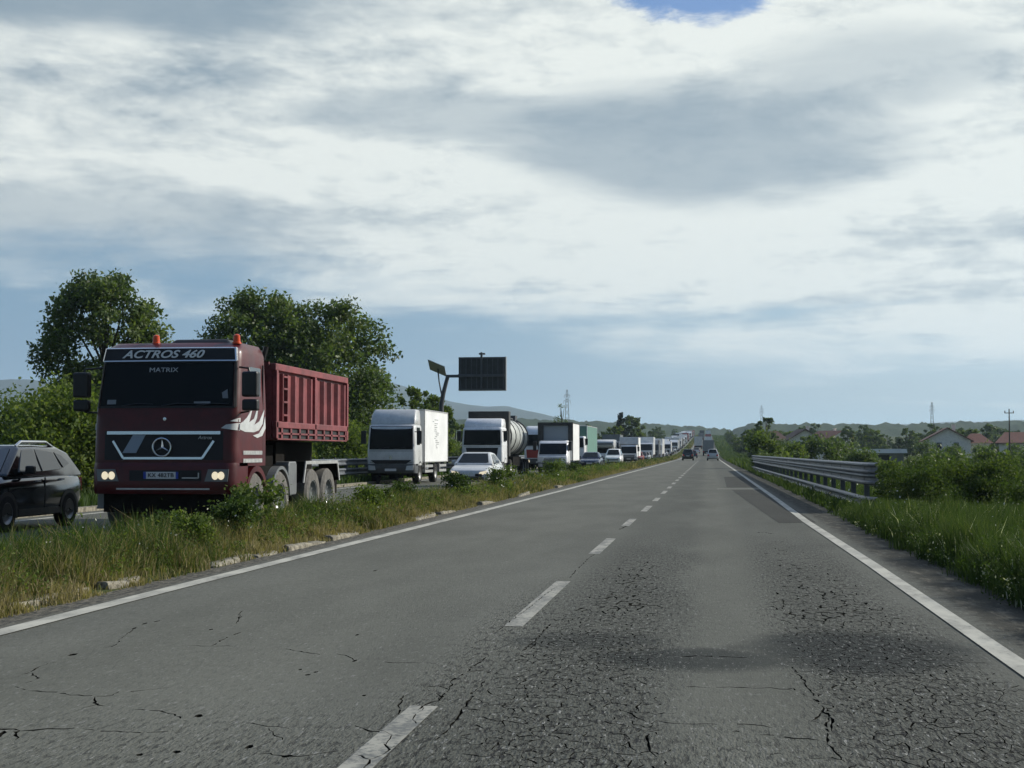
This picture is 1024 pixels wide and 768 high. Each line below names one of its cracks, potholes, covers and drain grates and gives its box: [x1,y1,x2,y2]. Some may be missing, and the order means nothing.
crack [356,715,416,768]
crack [252,723,334,759]
crack [17,662,169,708]
crack [428,547,1024,768]
crack [0,709,185,740]
